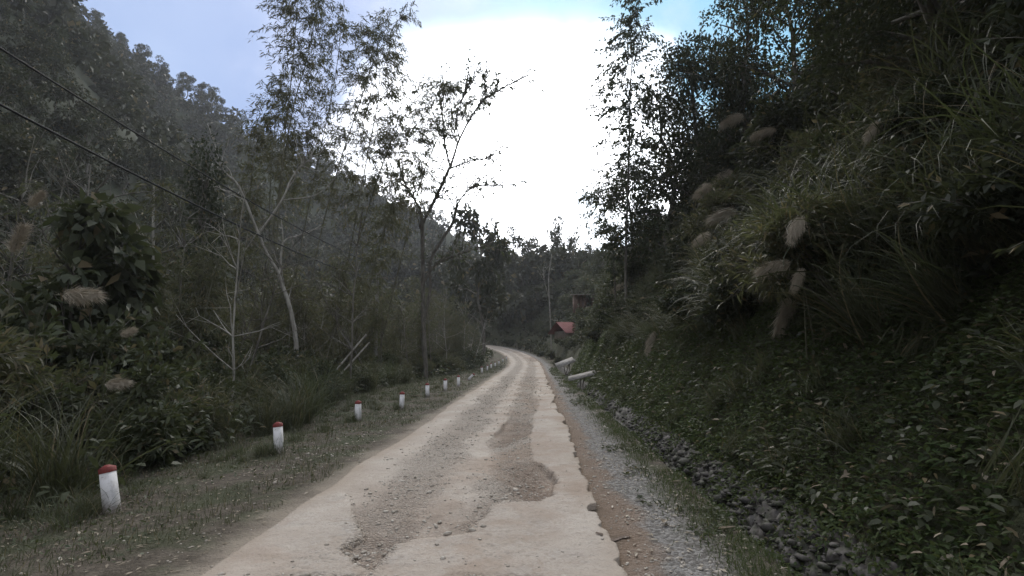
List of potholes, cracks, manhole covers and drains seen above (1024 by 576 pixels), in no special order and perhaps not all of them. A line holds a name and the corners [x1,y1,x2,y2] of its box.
pothole [482,457,565,509]
pothole [477,409,538,450]
pothole [327,466,498,575]
